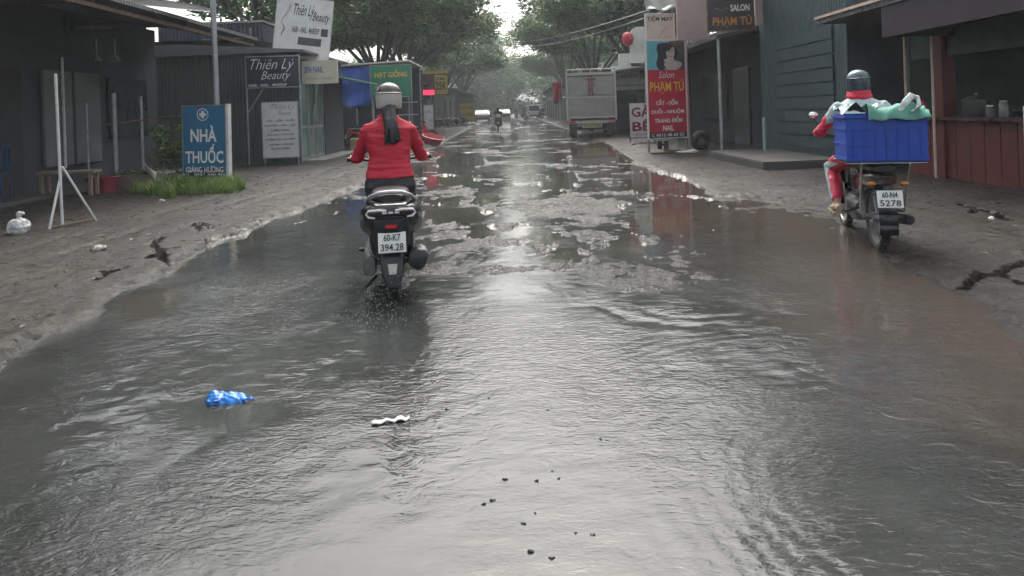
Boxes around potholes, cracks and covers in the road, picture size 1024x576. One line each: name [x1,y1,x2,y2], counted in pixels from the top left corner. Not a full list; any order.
crack [955,261,1024,291]
crack [145,236,171,267]
crack [957,204,1015,221]
crack [191,223,213,231]
crack [90,268,122,281]
